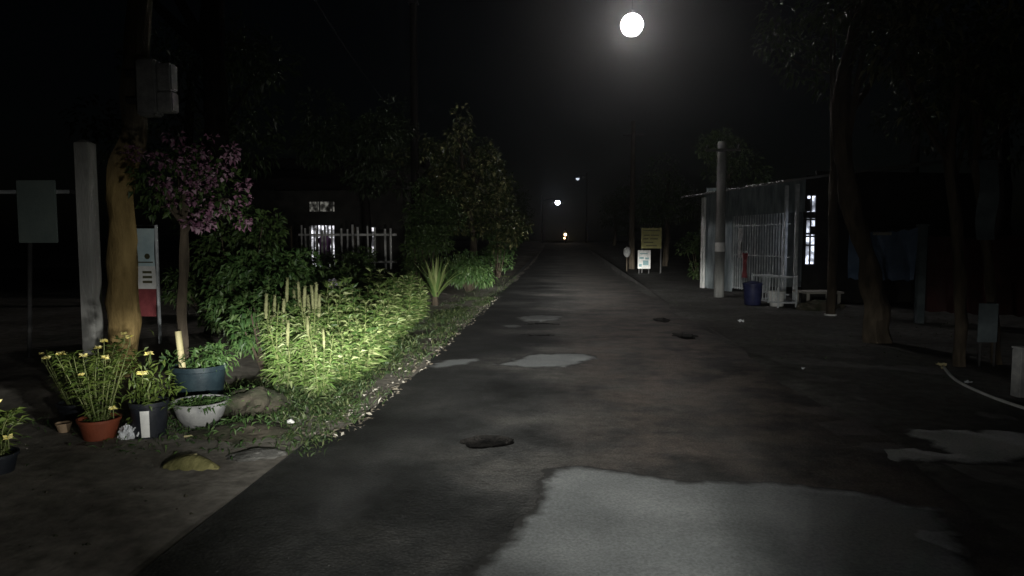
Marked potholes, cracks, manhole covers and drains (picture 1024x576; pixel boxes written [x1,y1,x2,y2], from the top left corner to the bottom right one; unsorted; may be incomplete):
pothole [459,435,514,449]
